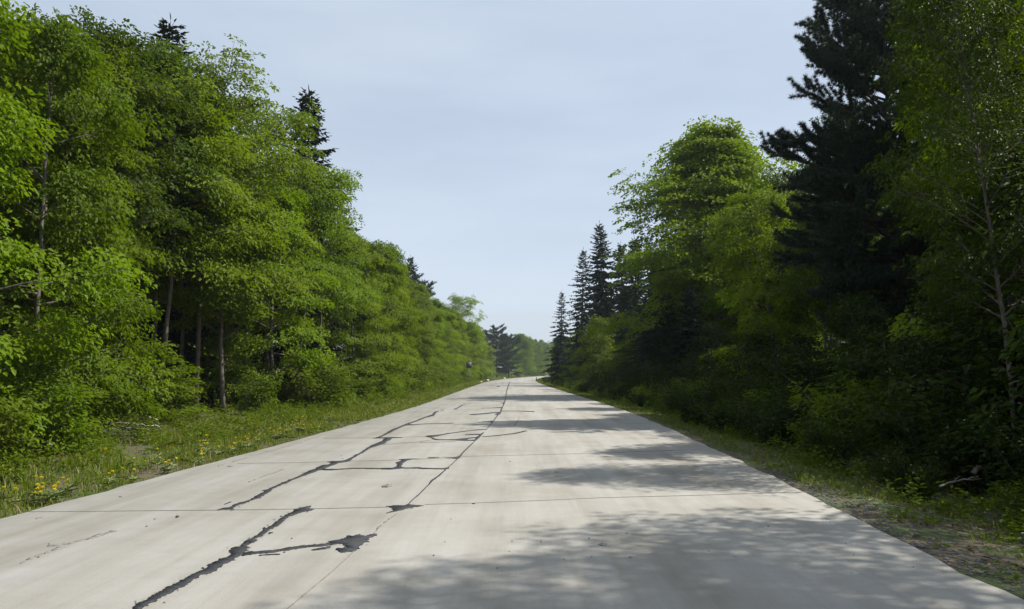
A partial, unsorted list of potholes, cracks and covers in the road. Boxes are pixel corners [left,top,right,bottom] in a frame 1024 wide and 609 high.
crack [218,436,320,482]
crack [20,517,117,564]
